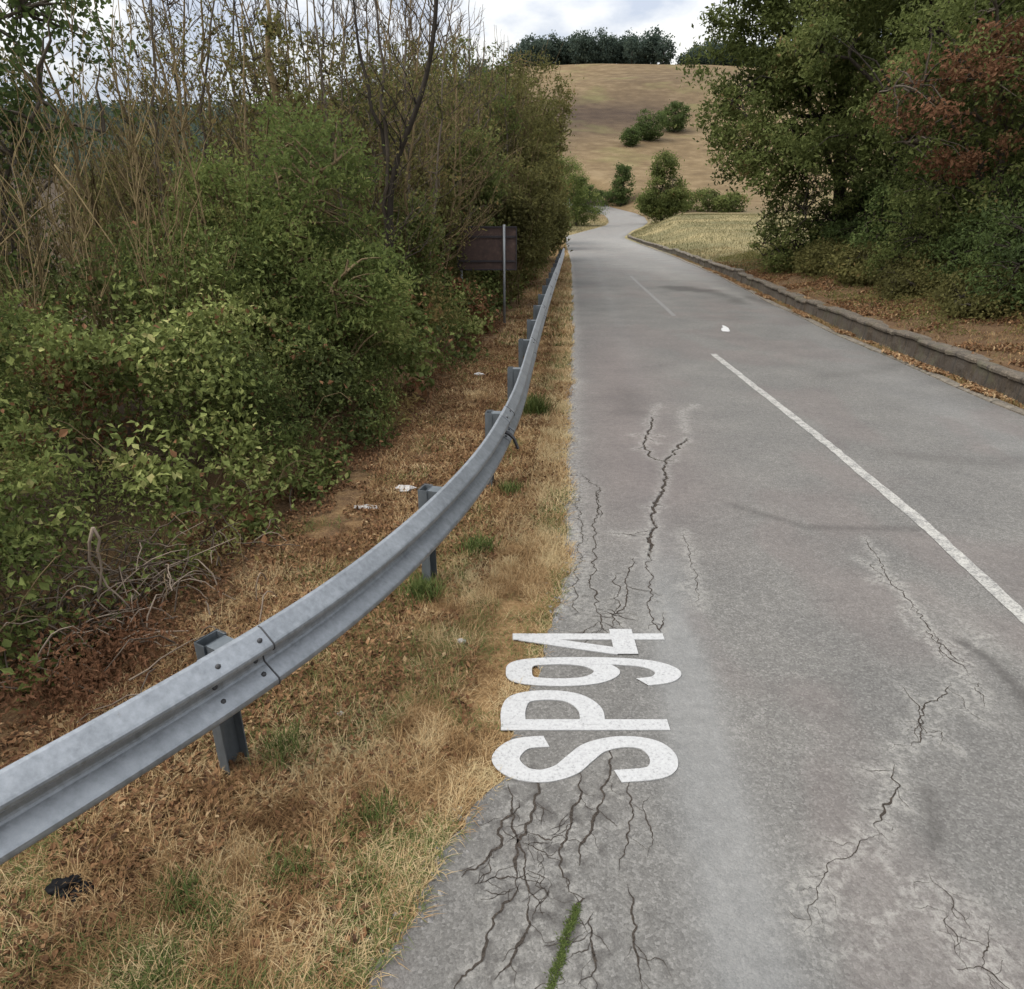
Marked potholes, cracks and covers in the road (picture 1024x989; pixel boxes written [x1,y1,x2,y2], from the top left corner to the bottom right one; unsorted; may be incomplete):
crack [914,874,1014,989]
crack [866,539,971,673]
crack [454,750,672,989]
crack [892,677,985,748]
crack [572,419,687,643]
crack [789,764,910,932]
